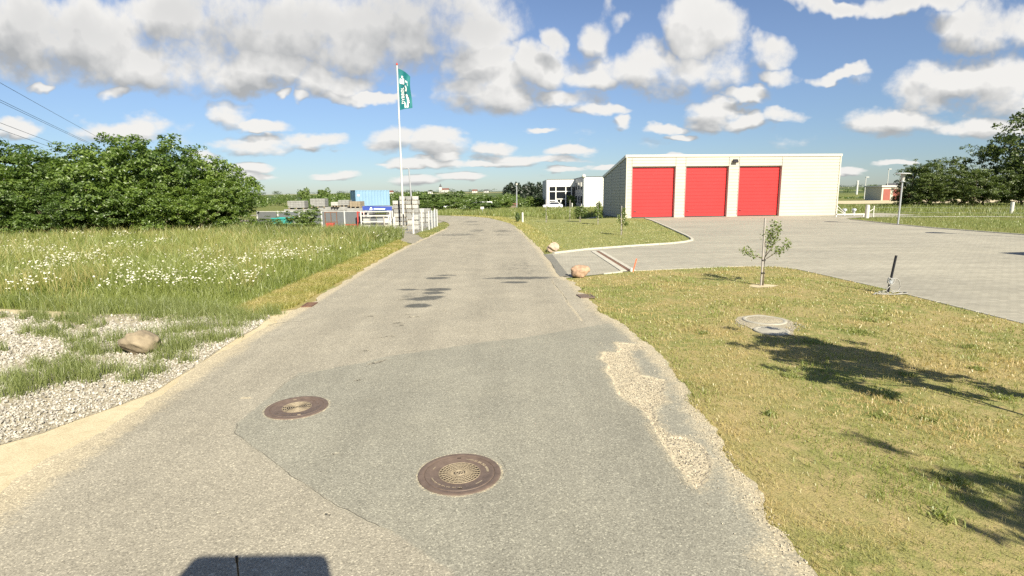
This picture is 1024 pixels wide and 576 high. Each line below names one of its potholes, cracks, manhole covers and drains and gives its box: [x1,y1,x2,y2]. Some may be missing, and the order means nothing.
manhole cover [418,454,501,496]
pothole [598,342,717,492]
manhole cover [264,396,328,420]
